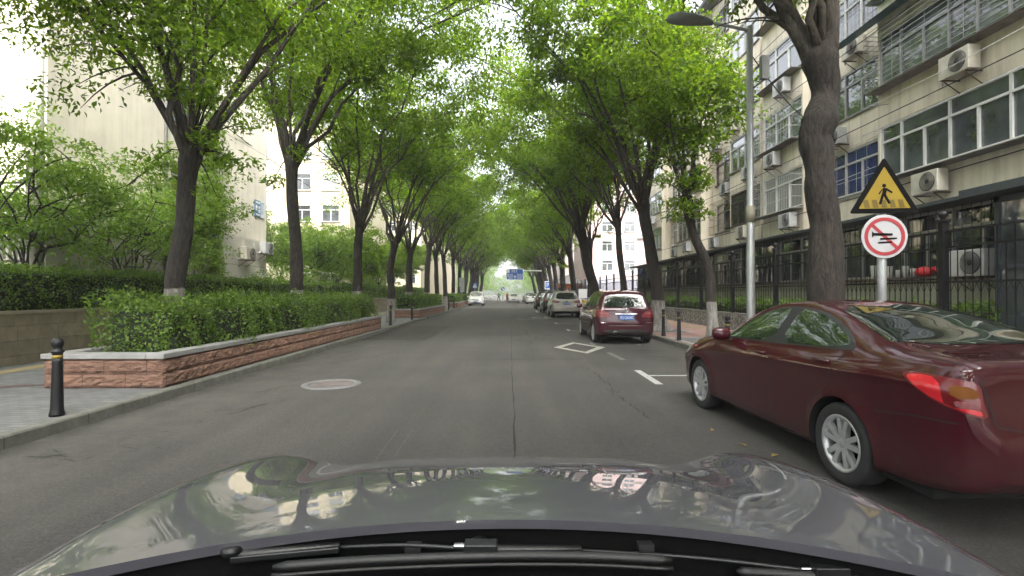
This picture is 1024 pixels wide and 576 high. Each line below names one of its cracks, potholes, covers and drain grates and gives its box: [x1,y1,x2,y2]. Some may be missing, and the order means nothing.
crack [581,366,649,418]
manhole cover [301,379,361,390]
